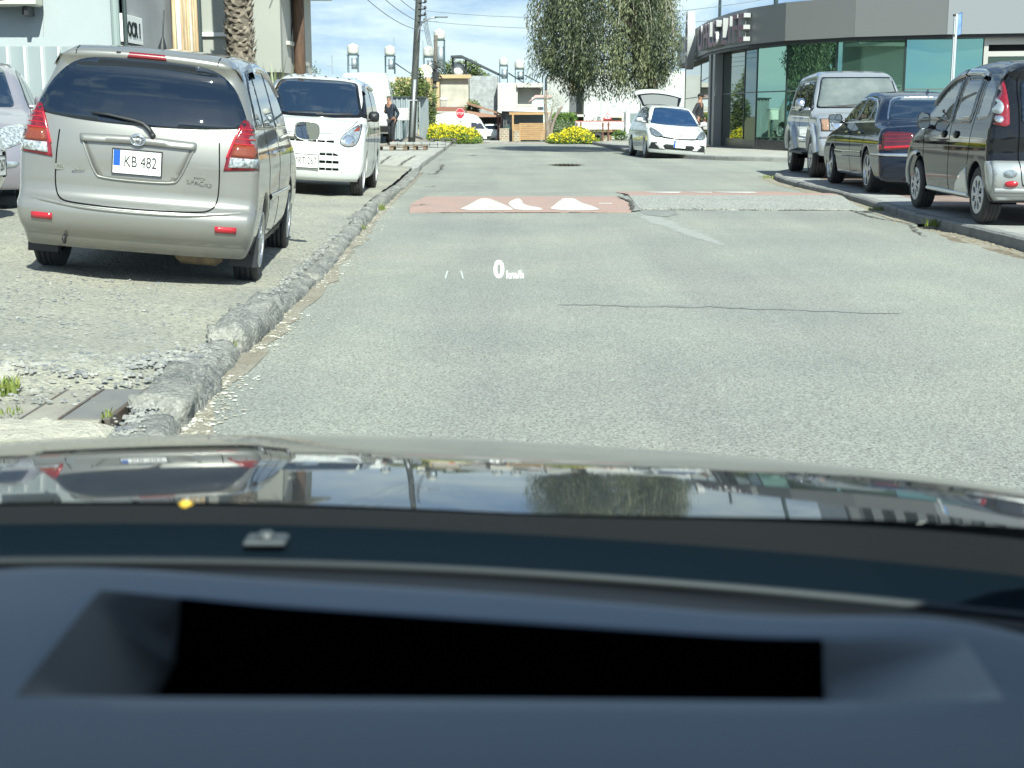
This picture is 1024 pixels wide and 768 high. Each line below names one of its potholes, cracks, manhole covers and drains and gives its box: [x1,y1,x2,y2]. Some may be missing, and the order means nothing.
crack [850,210,926,237]
crack [558,304,901,314]
